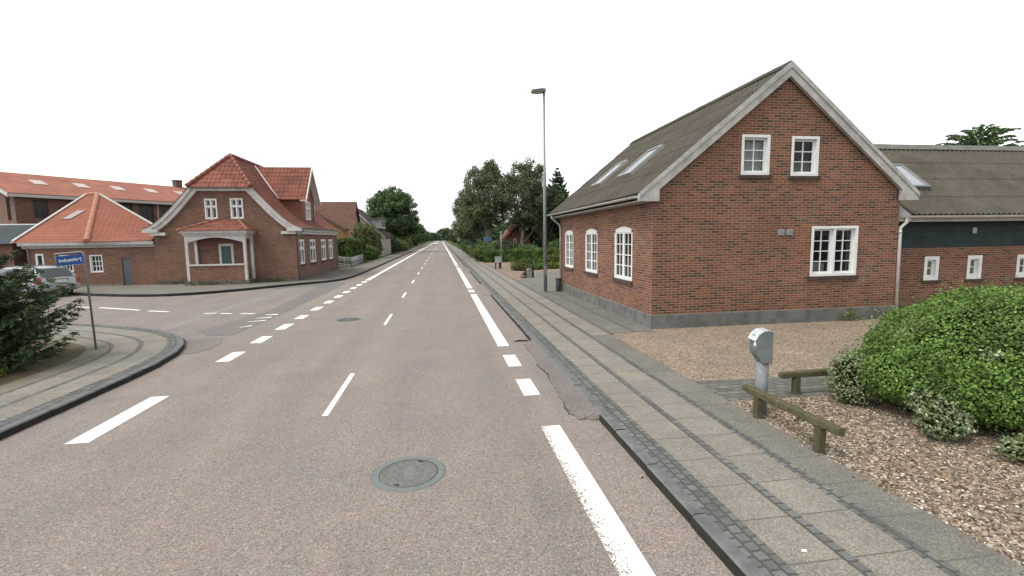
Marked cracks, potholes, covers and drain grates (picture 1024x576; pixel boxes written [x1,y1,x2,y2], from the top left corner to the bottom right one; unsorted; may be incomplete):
manhole cover [371,456,445,492]
